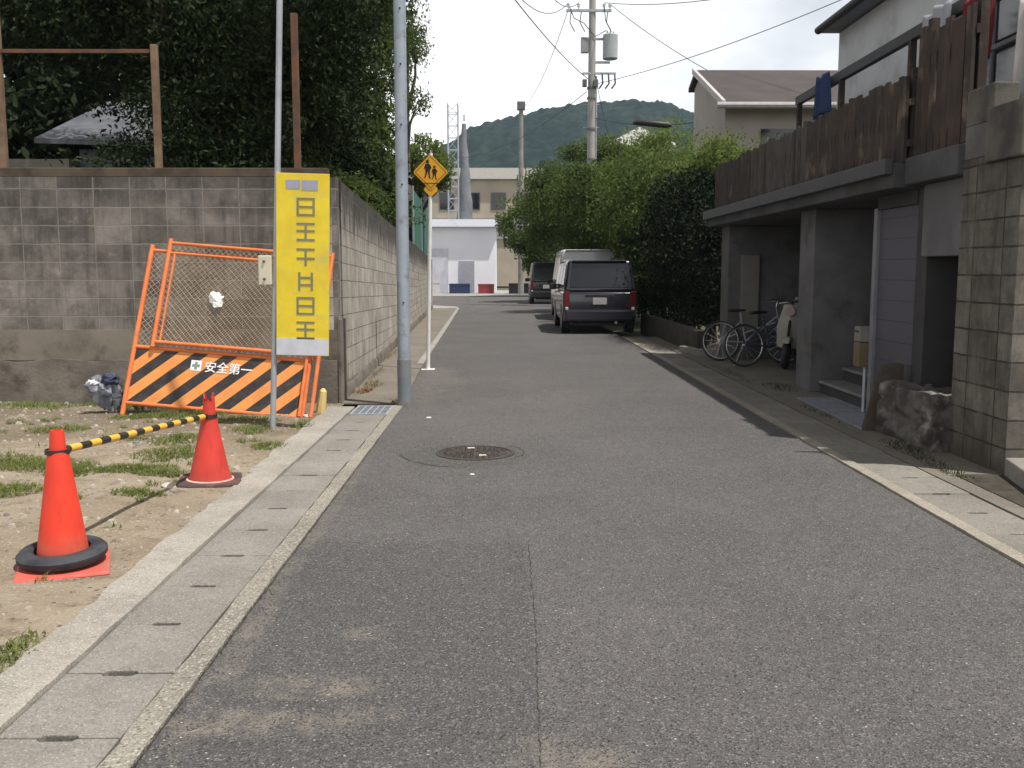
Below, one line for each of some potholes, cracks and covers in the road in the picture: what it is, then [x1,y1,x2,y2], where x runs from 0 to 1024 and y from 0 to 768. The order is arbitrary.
manhole cover [436,445,514,461]
drain grate [349,405,394,415]
